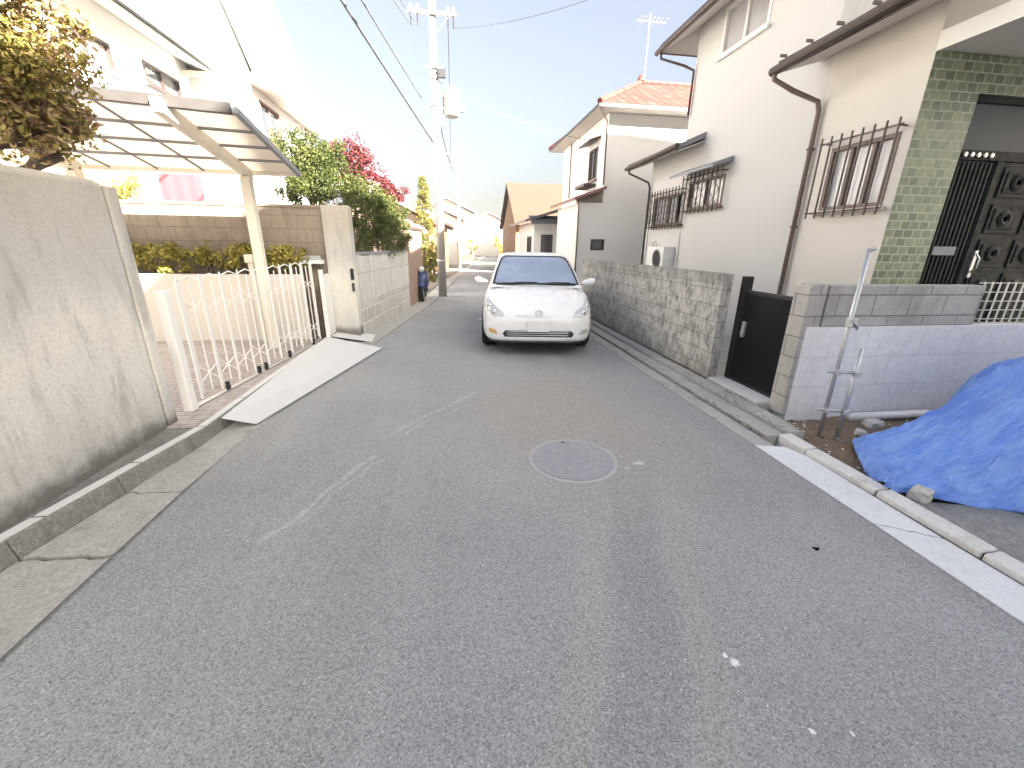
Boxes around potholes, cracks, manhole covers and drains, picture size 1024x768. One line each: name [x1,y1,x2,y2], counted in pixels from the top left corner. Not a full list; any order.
manhole cover [528,439,618,484]
